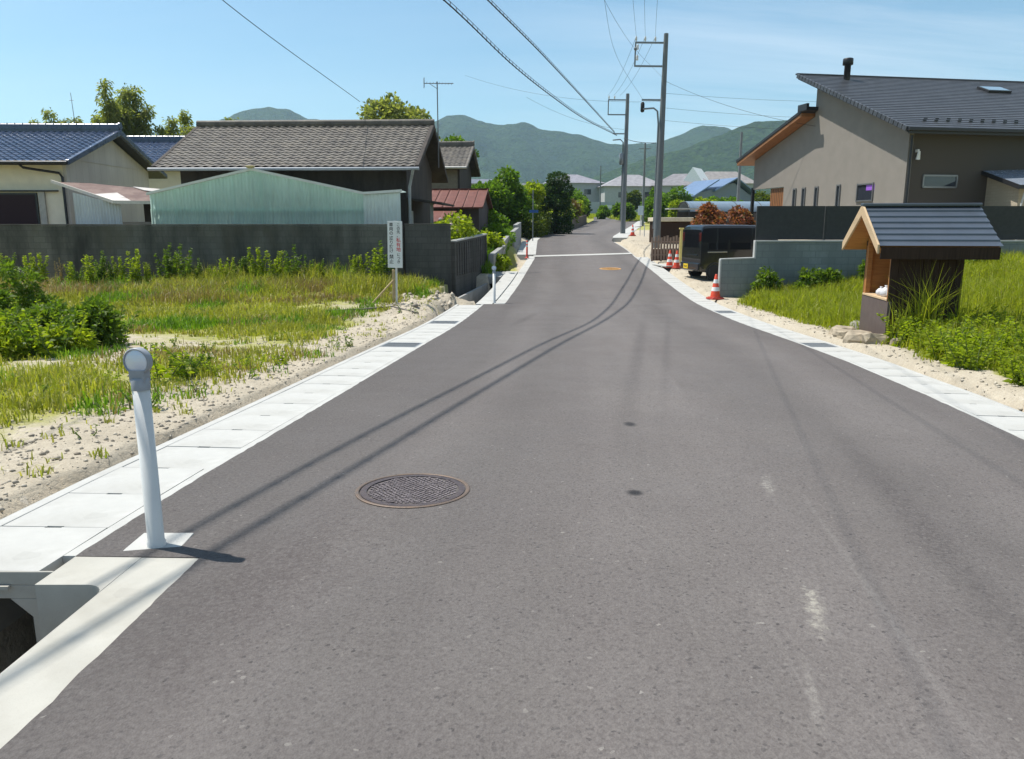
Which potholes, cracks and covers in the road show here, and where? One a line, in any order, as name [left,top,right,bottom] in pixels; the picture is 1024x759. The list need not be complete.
manhole cover [355,473,470,509]
